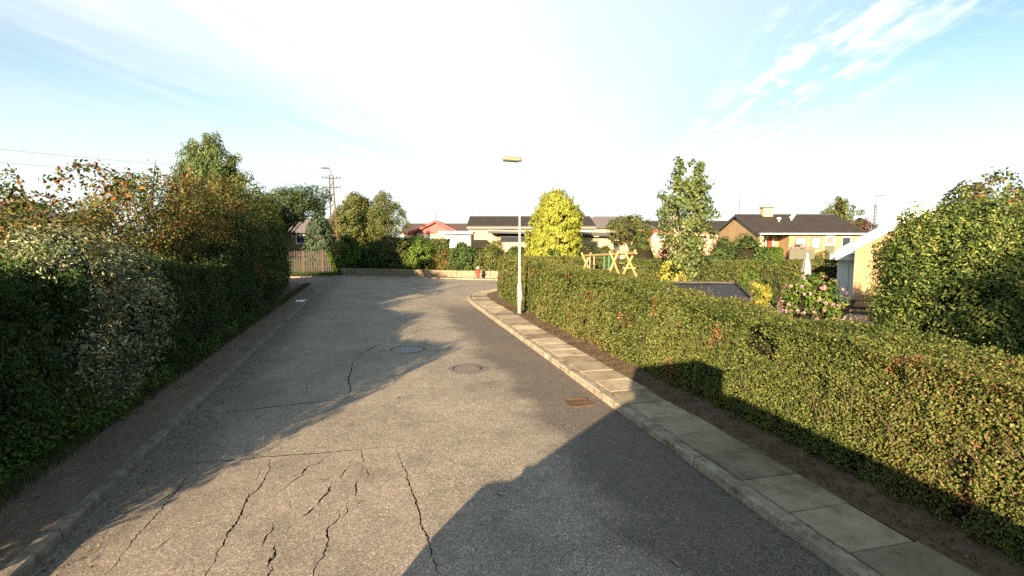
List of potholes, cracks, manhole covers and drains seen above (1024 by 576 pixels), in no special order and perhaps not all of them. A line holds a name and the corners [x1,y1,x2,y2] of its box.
crack [106,446,439,576]
drain grate [563,397,595,407]
crack [222,338,398,413]
